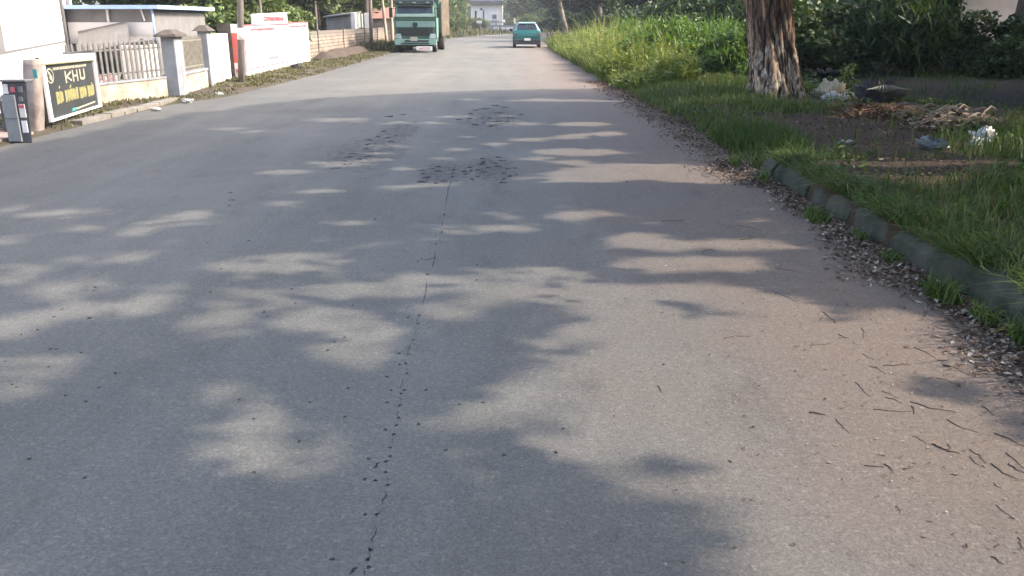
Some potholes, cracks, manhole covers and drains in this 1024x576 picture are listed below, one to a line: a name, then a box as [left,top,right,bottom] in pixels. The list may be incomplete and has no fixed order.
crack [397,223,443,414]
crack [349,462,388,575]
